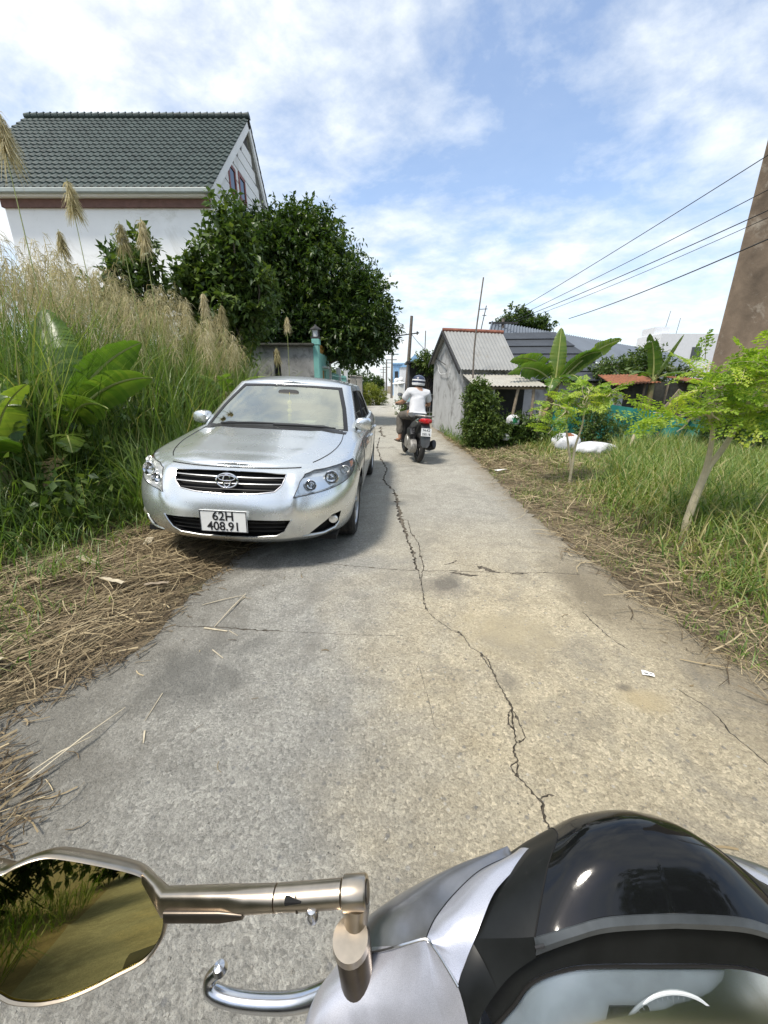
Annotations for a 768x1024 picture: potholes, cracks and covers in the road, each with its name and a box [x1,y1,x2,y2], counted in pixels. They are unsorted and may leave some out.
crack [677,689,768,765]
crack [376,426,556,829]
